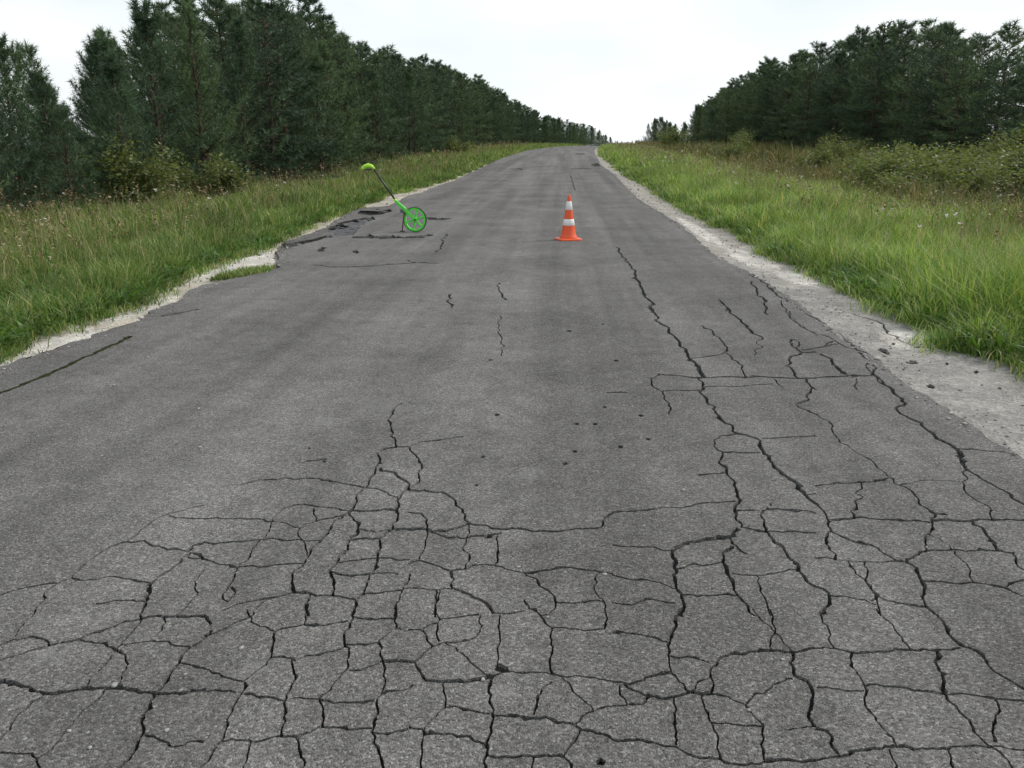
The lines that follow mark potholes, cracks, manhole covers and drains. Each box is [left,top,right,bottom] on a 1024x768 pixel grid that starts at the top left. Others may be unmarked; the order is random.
pothole [328,217,375,237]
crack [0,247,1024,768]
